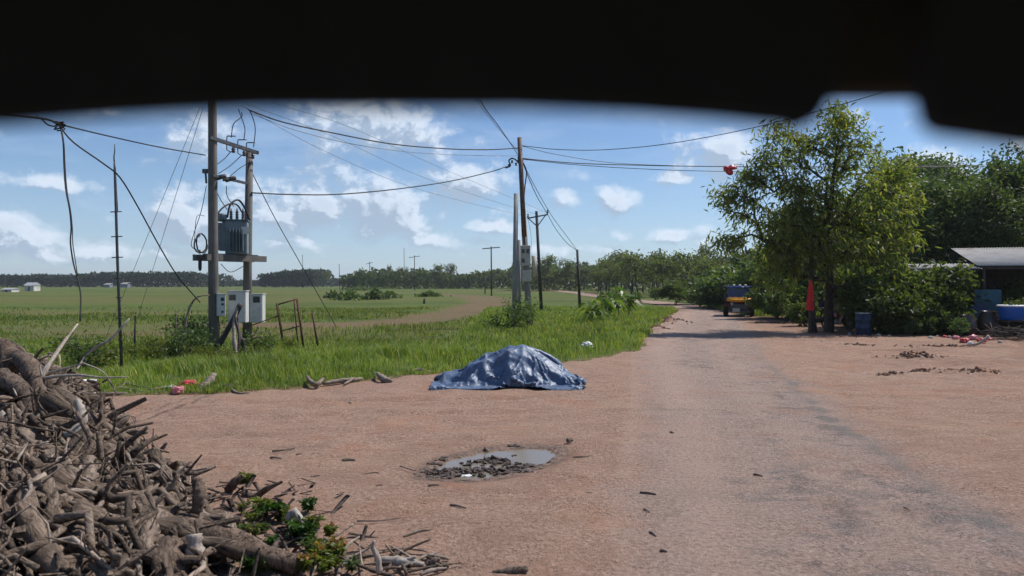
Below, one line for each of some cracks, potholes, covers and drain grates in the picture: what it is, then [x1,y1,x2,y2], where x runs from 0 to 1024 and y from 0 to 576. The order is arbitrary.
pothole [412,443,569,482]
